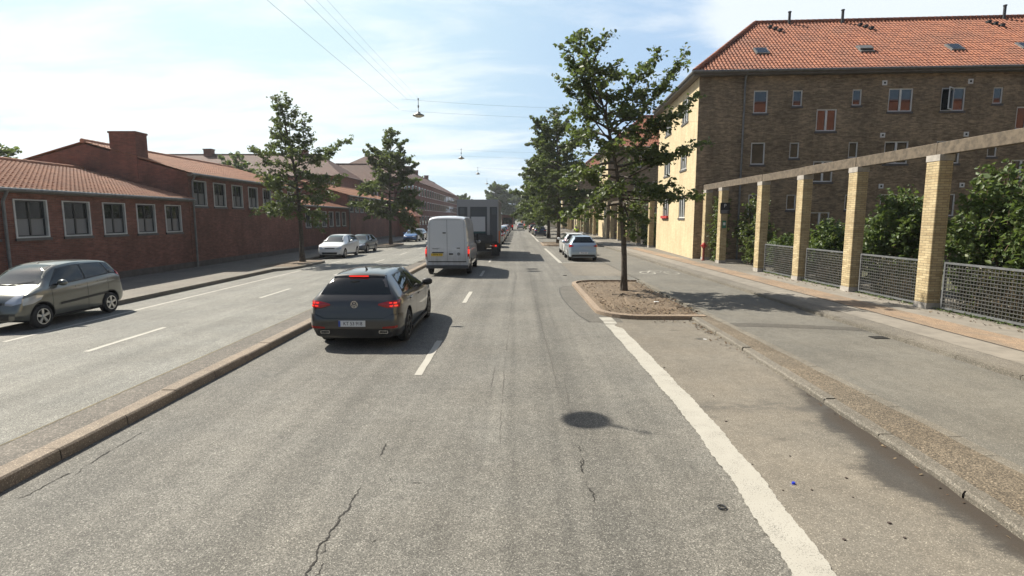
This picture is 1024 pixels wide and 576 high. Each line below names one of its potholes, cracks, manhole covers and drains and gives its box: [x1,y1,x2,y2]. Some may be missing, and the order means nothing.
crack [578,445,596,505]
crack [20,427,153,498]
crack [305,486,375,576]
